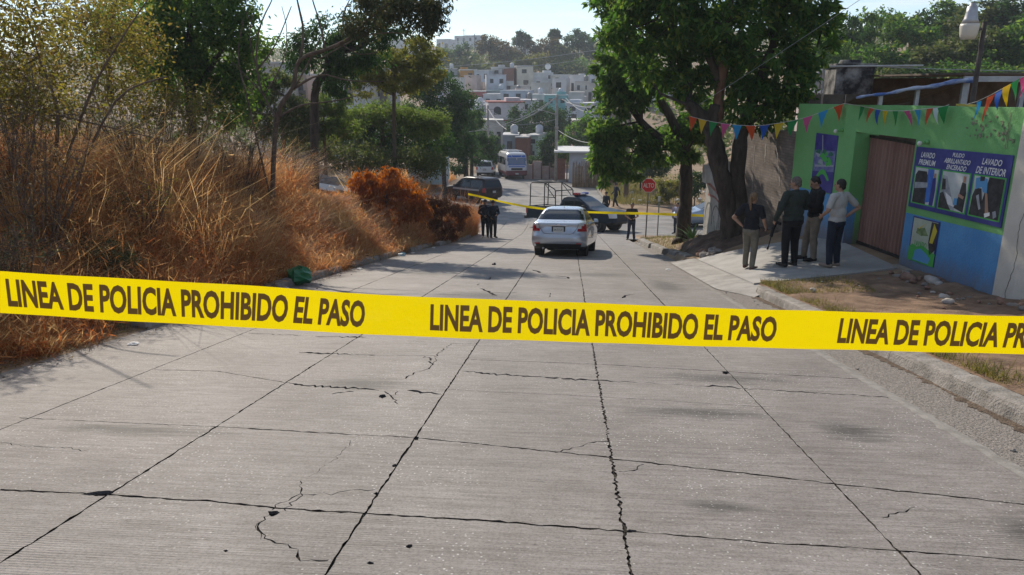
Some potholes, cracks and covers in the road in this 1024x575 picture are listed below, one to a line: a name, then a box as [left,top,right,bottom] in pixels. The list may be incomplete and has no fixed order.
crack [252,333,477,404]
crack [255,443,375,562]
